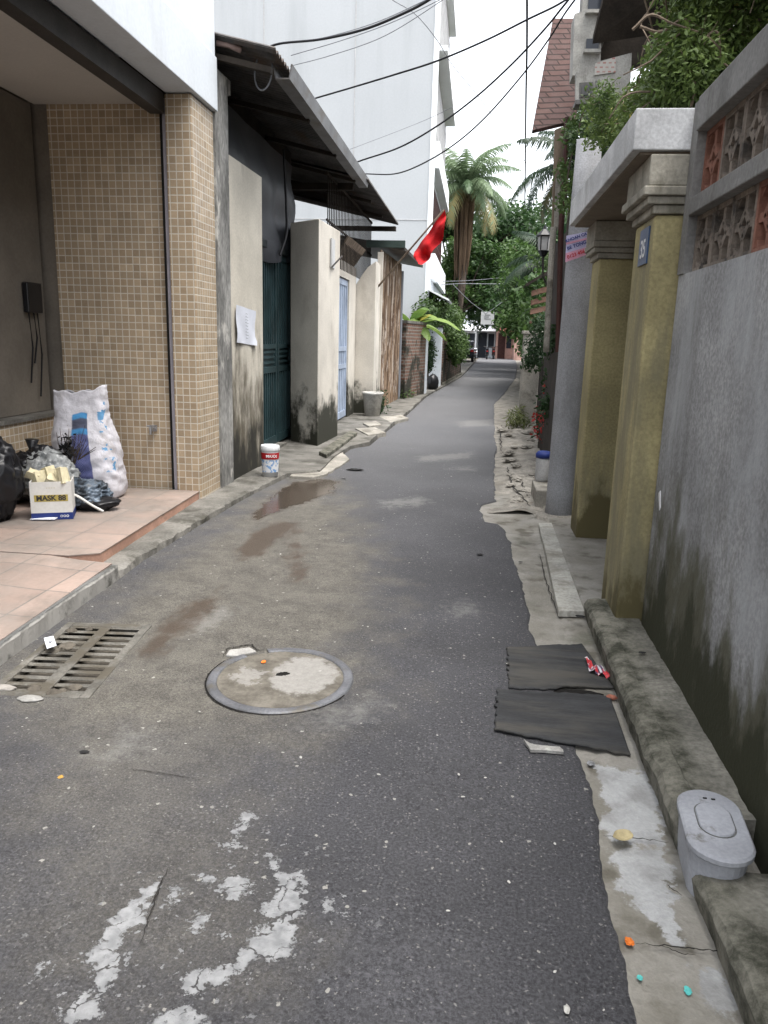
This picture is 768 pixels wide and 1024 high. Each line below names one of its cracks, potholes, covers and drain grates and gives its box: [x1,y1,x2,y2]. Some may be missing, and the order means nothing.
crack [499,425,530,506]
drain grate [0,622,152,699]
crack [636,943,717,955]
manhole cover [204,648,353,715]
